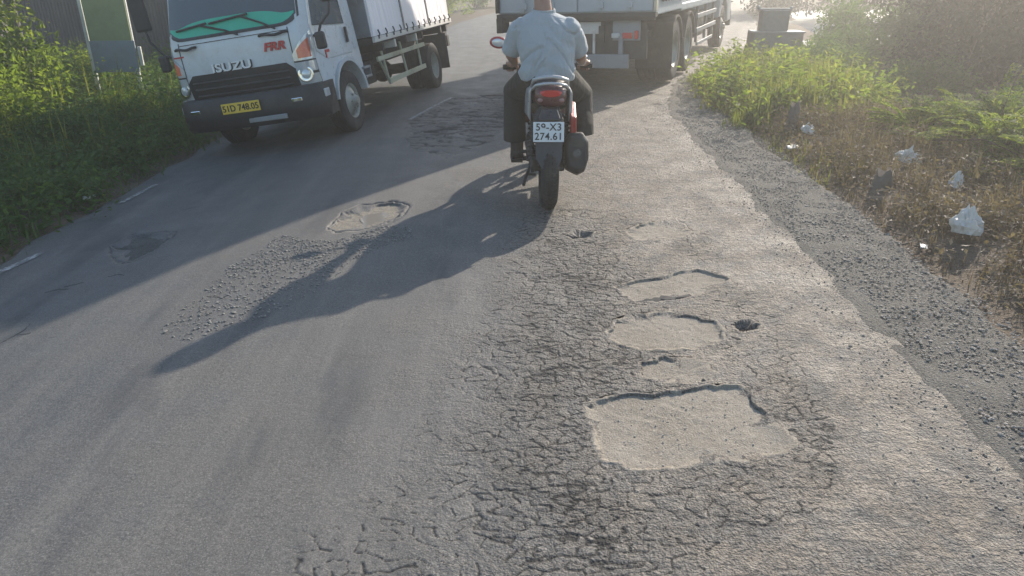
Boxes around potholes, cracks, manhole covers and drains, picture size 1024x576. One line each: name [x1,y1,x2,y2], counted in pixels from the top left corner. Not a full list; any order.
pothole [563,228,596,241]
pothole [726,318,765,334]
crack [251,207,850,576]
pothole [635,354,720,388]
pothole [611,268,732,304]
pothole [581,383,799,472]
pothole [603,310,727,357]
pothole [327,202,409,233]
